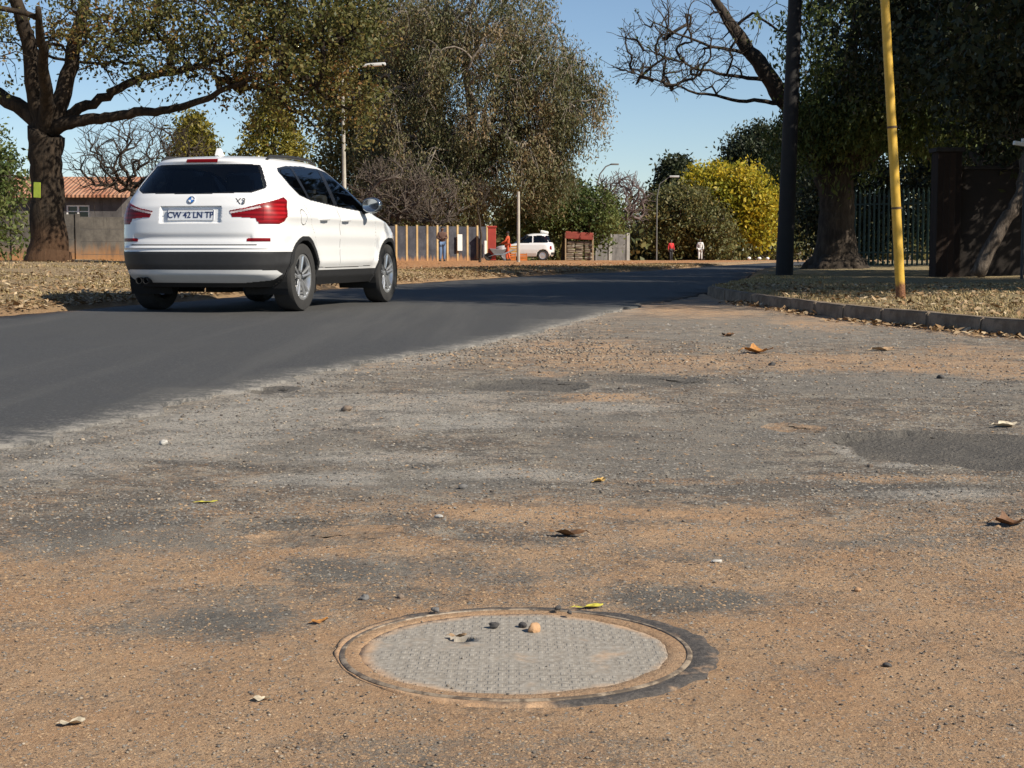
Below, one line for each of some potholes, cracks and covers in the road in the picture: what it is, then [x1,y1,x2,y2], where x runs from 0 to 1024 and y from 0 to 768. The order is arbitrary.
manhole cover [334,607,719,708]
pothole [455,379,593,392]
pothole [250,386,301,394]
